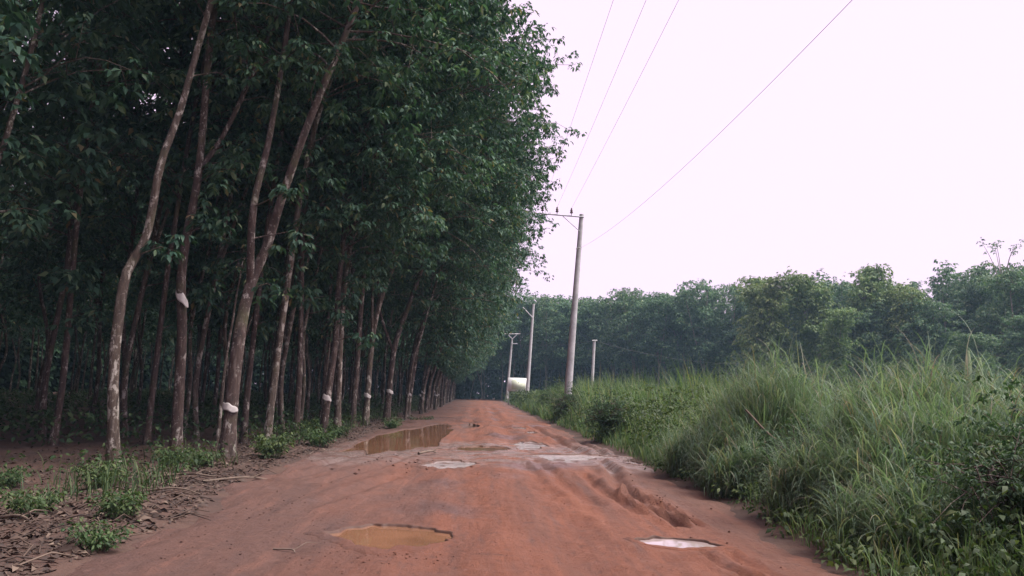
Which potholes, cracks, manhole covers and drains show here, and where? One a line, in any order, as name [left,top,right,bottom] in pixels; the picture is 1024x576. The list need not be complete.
pothole [504,440,555,453]
pothole [291,421,462,466]
pothole [303,521,470,555]
pothole [410,459,488,471]
pothole [622,535,739,552]
pothole [519,453,633,466]
